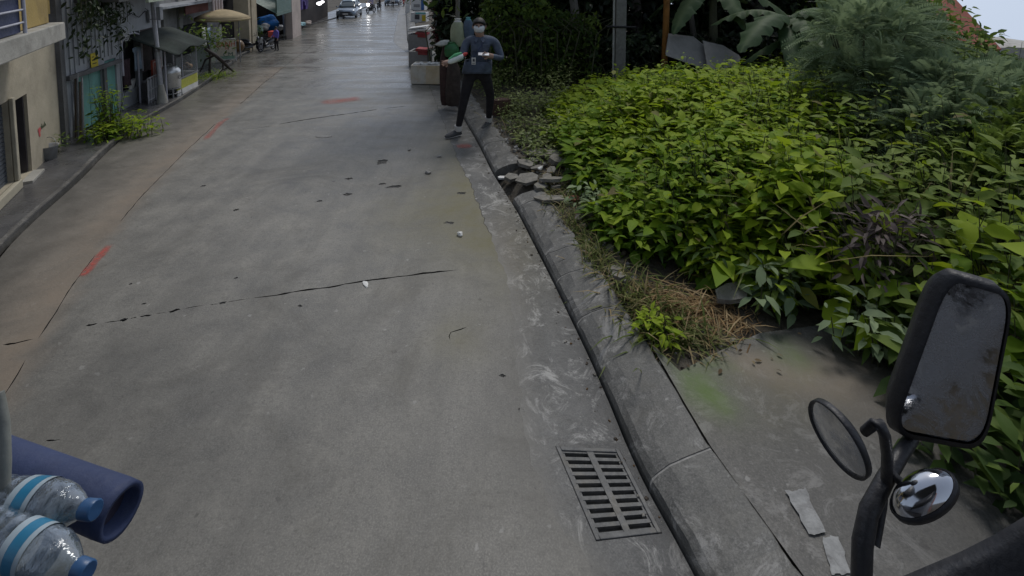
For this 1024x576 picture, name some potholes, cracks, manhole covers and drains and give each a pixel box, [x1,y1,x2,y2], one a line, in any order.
crack [251,106,404,129]
drain grate [556,446,661,541]
crack [86,270,452,326]
